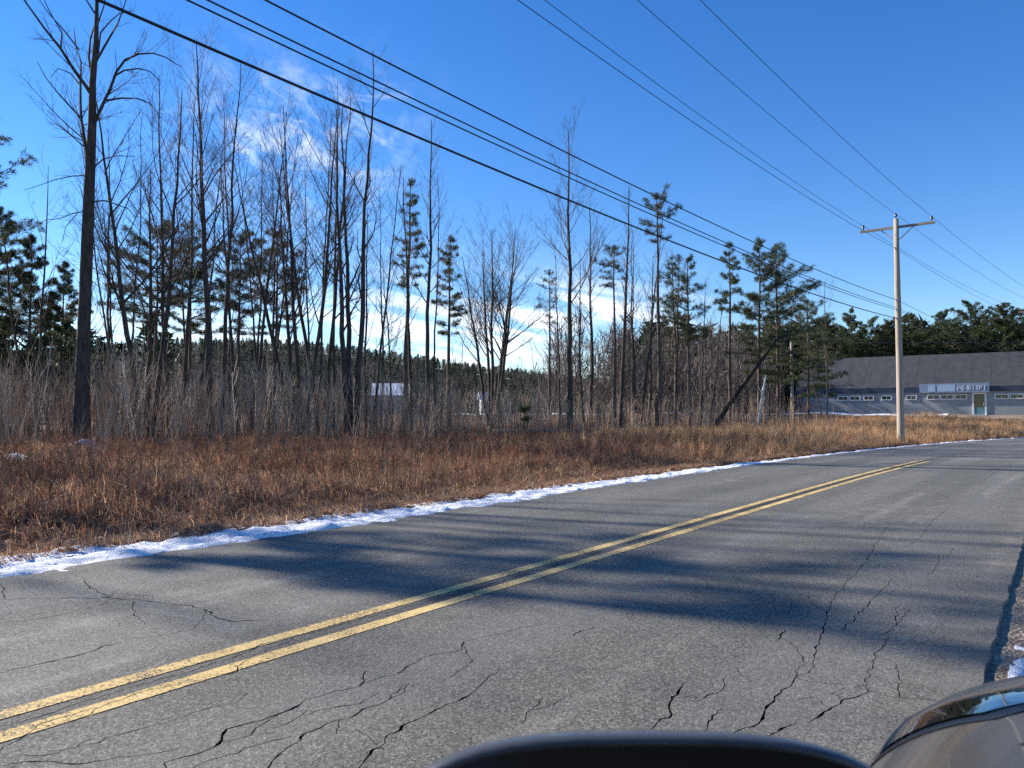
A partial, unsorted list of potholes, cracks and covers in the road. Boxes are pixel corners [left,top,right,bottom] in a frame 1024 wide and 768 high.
crack [0,625,537,768]
crack [0,573,273,639]
crack [651,522,938,735]
